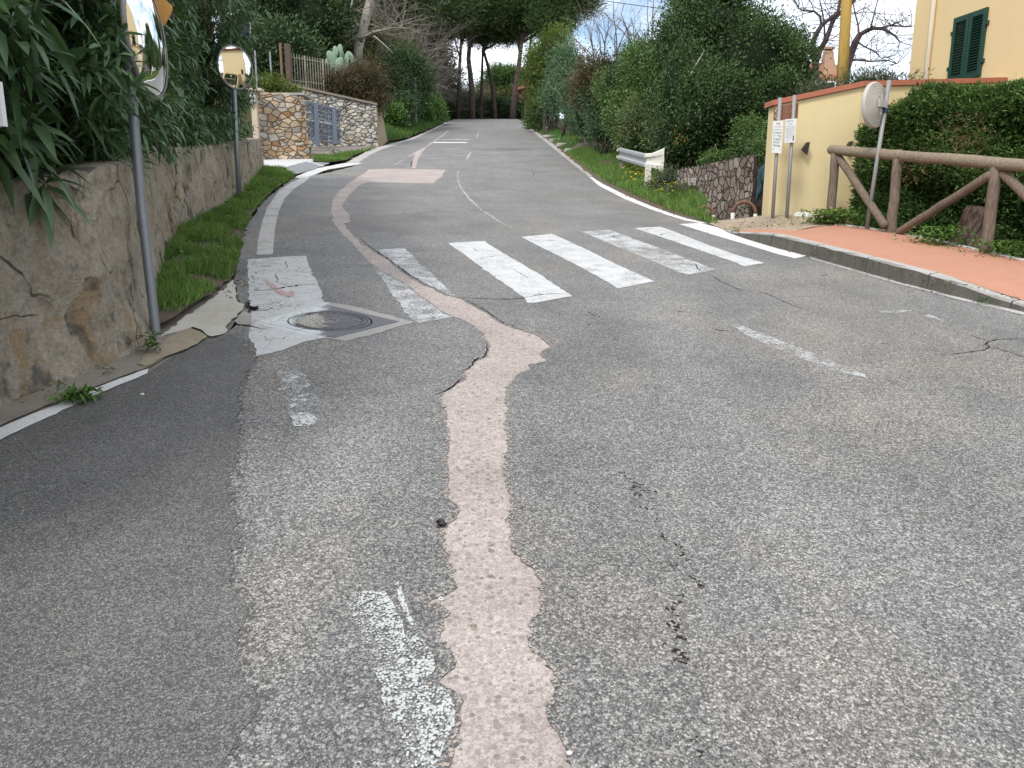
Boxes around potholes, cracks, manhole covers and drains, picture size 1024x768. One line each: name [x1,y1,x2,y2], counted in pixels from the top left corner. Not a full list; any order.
crack [956,335,1024,357]
manhole cover [256,302,413,341]
